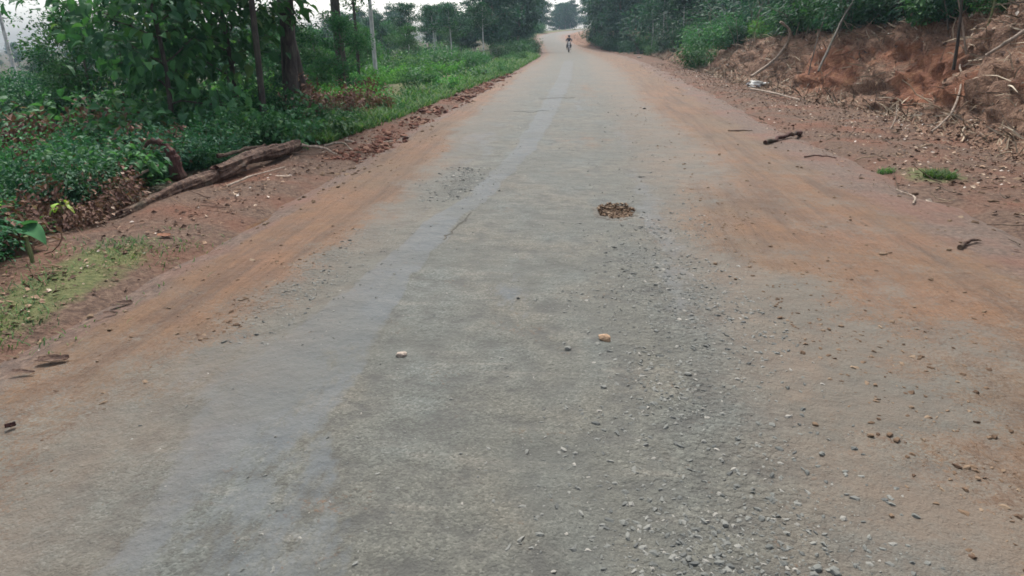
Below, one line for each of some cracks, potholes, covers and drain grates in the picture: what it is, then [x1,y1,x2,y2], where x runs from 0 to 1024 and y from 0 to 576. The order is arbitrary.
crack [444,212,472,240]
pothole [591,202,640,221]
